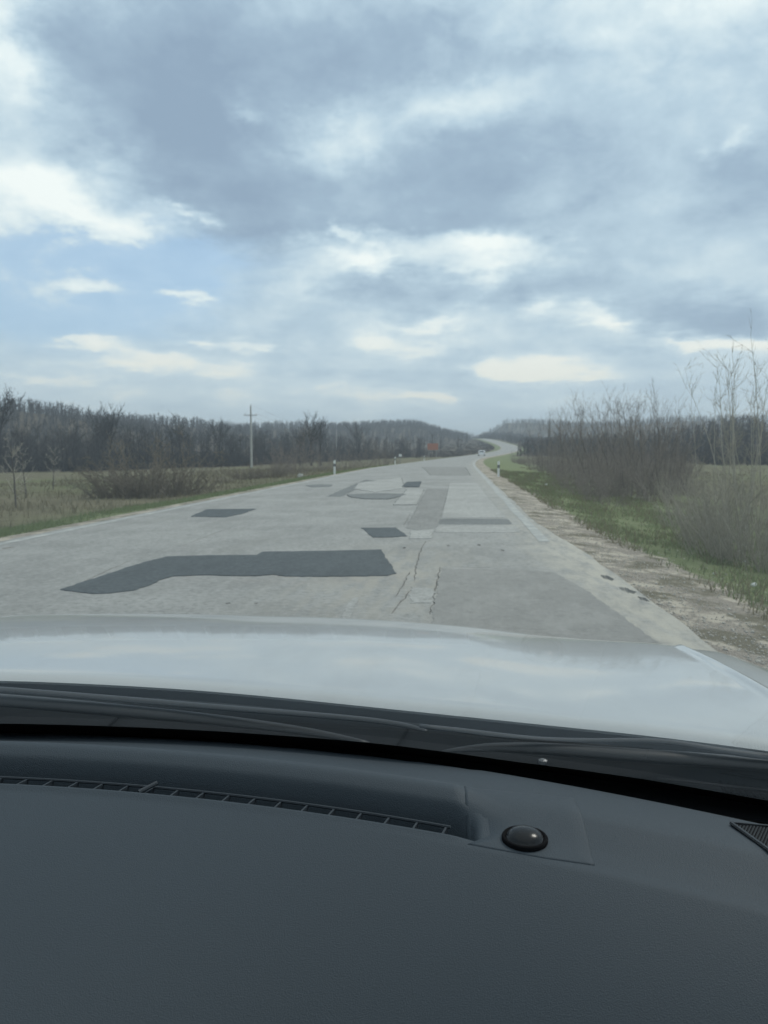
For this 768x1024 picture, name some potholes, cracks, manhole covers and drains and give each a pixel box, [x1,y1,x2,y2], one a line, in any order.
crack [391,541,426,614]
